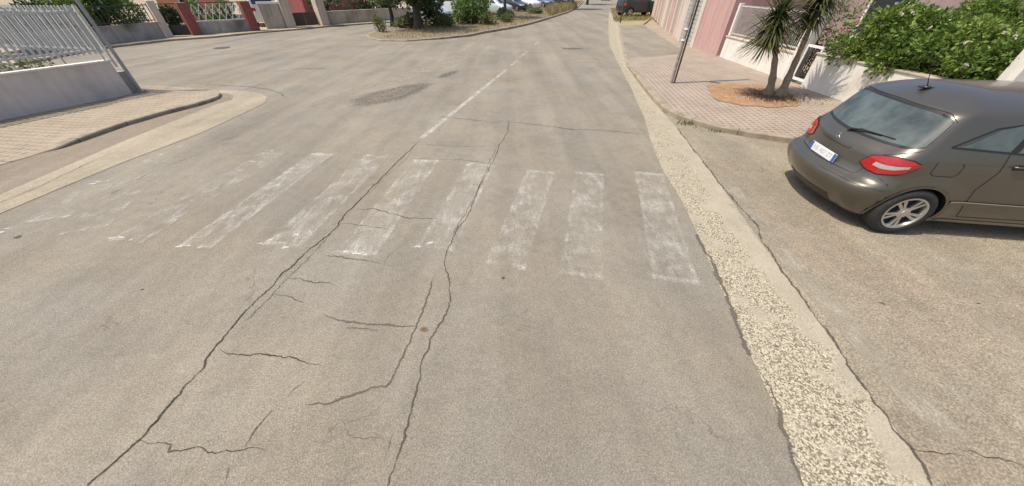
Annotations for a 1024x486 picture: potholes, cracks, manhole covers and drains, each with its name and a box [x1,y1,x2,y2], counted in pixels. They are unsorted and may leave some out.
crack [911,448,1023,467]
crack [140,124,509,486]
